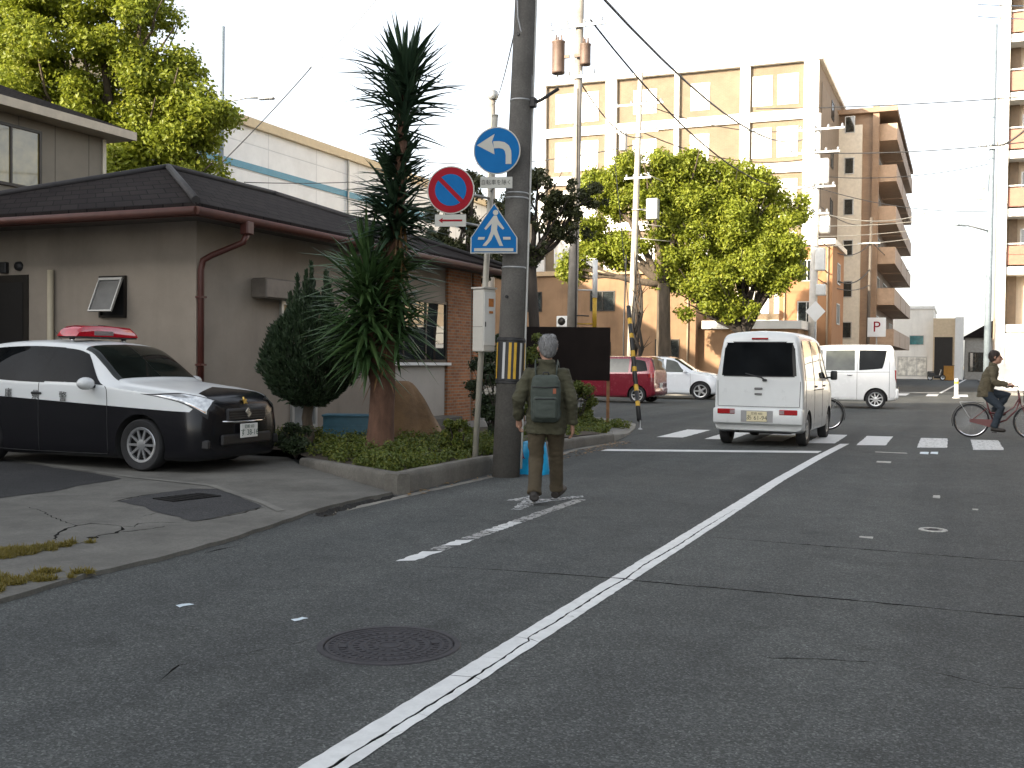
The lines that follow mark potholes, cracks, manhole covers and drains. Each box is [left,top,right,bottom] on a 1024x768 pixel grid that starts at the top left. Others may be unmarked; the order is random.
manhole cover [316,626,461,666]
crack [161,638,313,680]
crack [29,507,173,543]
